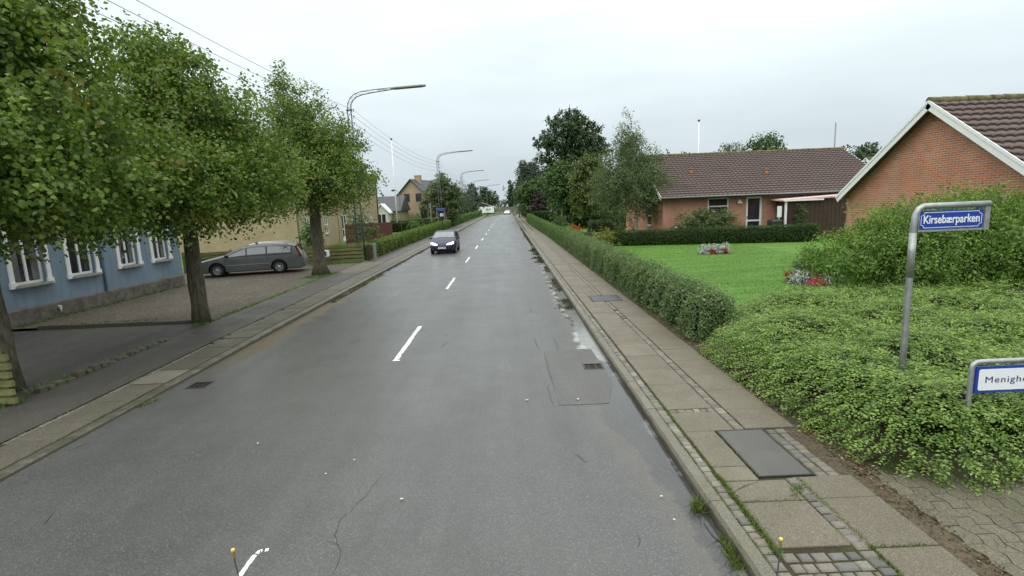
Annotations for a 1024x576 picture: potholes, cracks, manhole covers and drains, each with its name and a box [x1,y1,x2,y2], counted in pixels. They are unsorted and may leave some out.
crack [323,475,382,575]
manhole cover [716,428,815,479]
drain grate [184,381,215,389]
